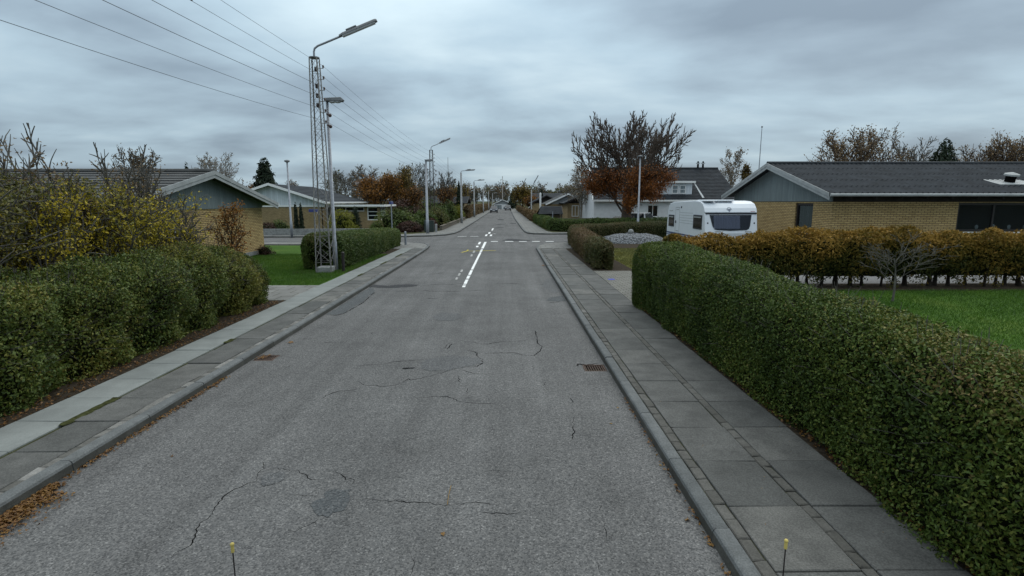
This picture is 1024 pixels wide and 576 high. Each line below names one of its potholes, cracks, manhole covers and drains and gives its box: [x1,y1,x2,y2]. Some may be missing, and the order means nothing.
crack [171,461,317,558]
crack [325,331,542,404]
crack [336,472,522,515]
